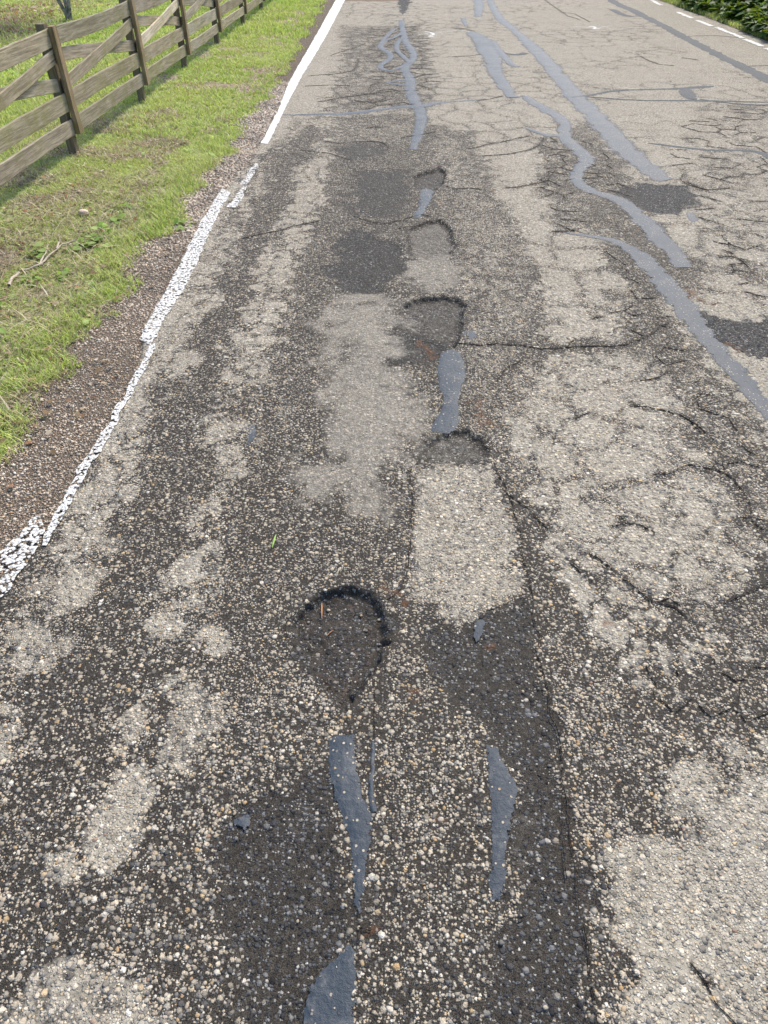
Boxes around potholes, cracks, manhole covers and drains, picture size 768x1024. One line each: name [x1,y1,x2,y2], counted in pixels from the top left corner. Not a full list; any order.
crack [570,551,768,722]
crack [282,0,768,530]
pothole [406,165,452,194]
pothole [393,293,476,351]
pothole [277,574,405,725]
pothole [404,424,505,471]
pothole [398,217,464,264]
